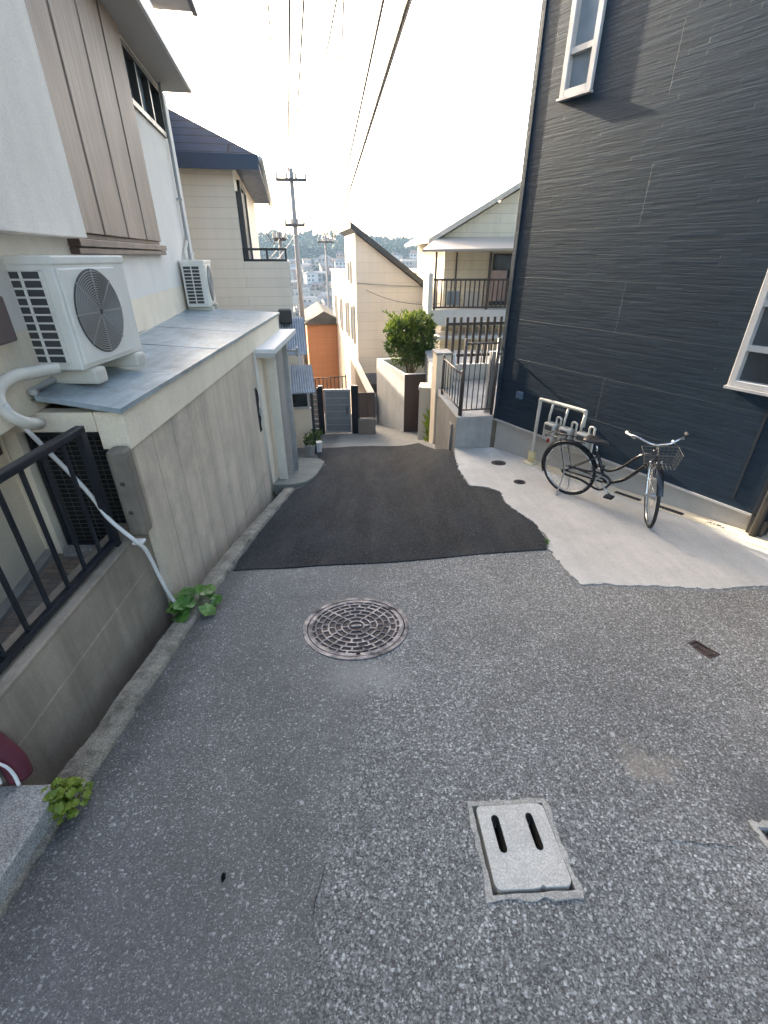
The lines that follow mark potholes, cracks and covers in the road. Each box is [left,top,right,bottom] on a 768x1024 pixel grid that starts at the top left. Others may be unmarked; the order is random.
manhole cover [303,598,409,661]
crack [311,865,326,922]
crack [667,839,736,848]
